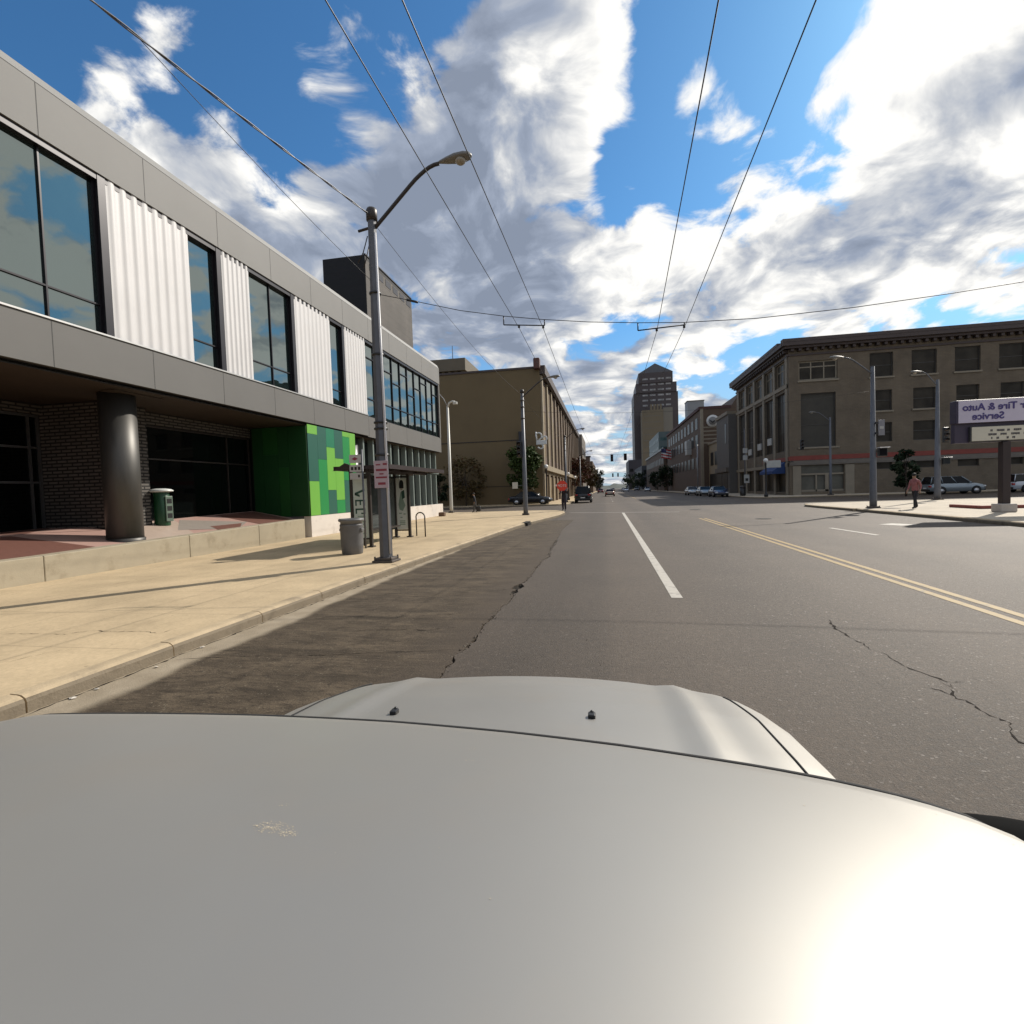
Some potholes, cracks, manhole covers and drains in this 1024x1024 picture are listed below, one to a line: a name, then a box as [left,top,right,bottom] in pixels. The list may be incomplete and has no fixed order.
crack [20,537,558,718]
crack [818,611,1023,743]
